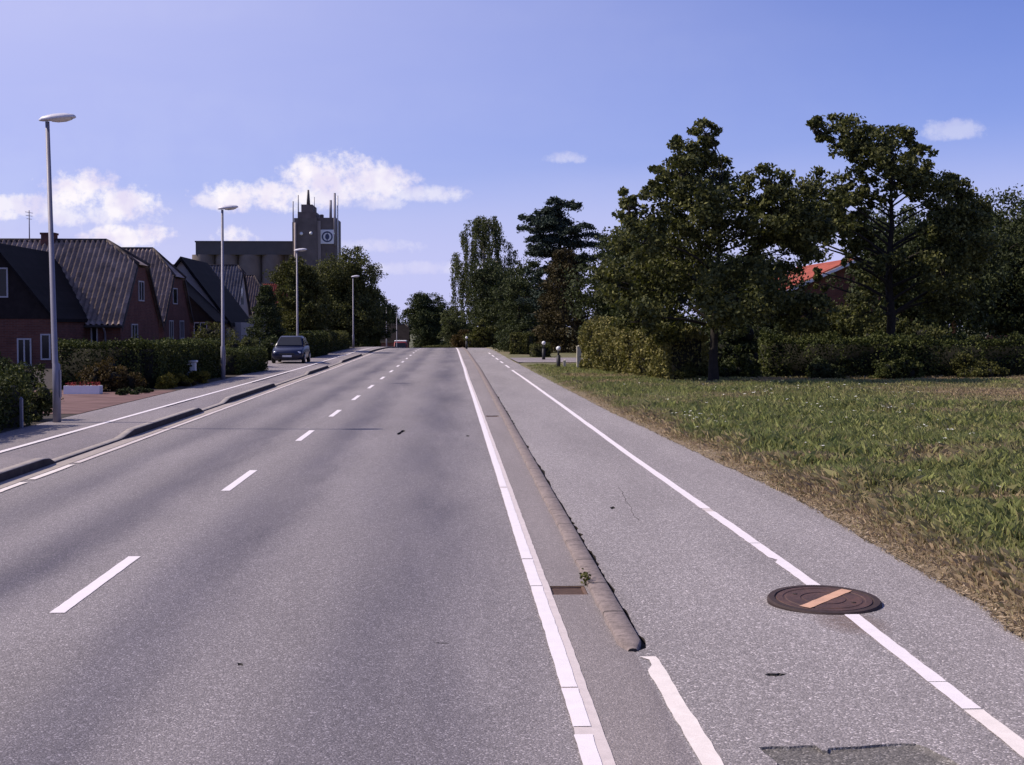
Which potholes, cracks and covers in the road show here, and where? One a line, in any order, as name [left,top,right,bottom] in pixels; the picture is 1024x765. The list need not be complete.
manhole cover [767,585,882,615]
drain grate [550,586,588,595]
